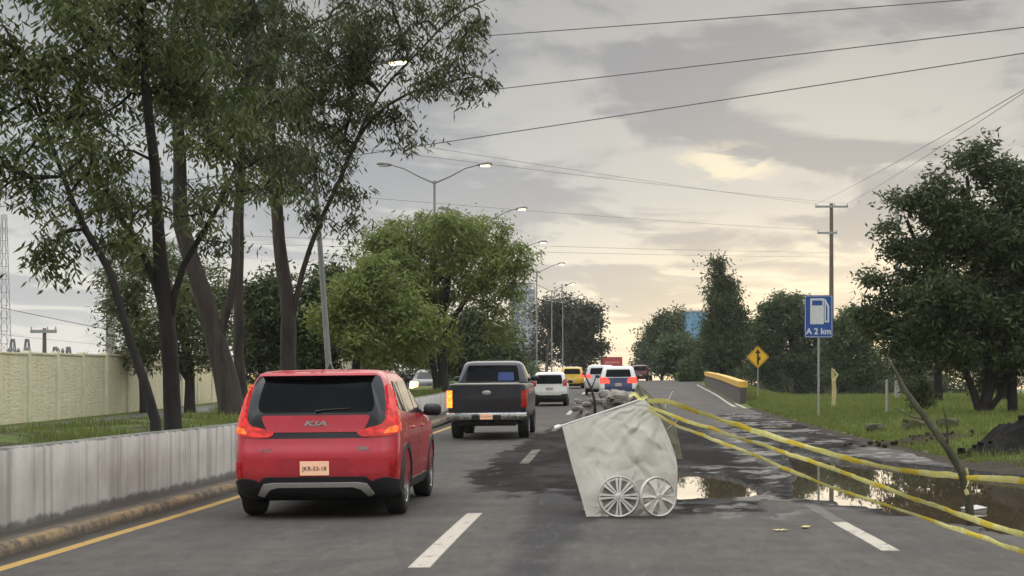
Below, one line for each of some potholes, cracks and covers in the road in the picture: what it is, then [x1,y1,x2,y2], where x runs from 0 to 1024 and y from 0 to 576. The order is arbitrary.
pothole [771,446,1024,535]
pothole [677,471,768,500]
